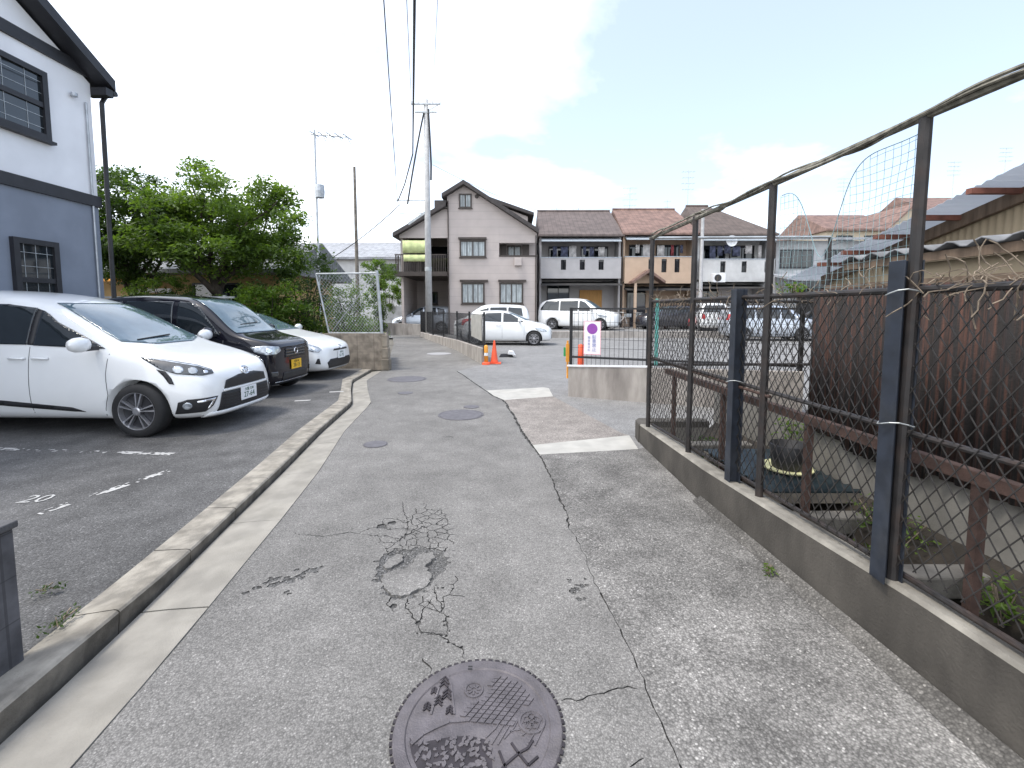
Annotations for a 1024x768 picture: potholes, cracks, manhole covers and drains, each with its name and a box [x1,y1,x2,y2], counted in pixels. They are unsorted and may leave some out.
manhole cover [389,659,565,768]
crack [299,503,465,674]
crack [561,686,636,702]
pothole [372,547,451,600]
manhole cover [438,409,484,420]
